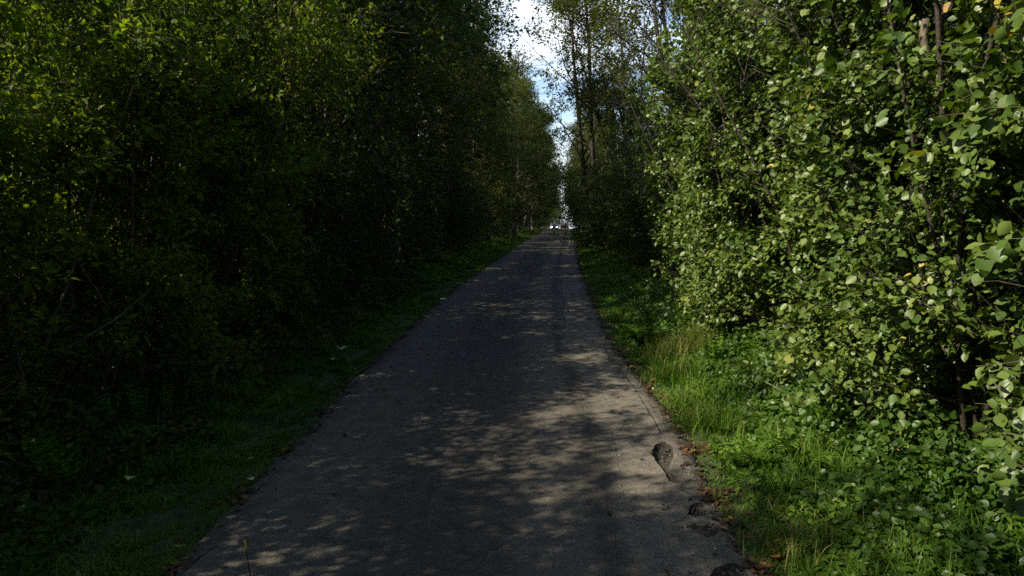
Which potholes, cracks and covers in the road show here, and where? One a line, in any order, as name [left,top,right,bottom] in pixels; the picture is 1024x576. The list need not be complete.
pothole [652,441,680,483]
pothole [687,502,706,517]
crack [603,345,661,434]
pothole [686,522,719,538]
